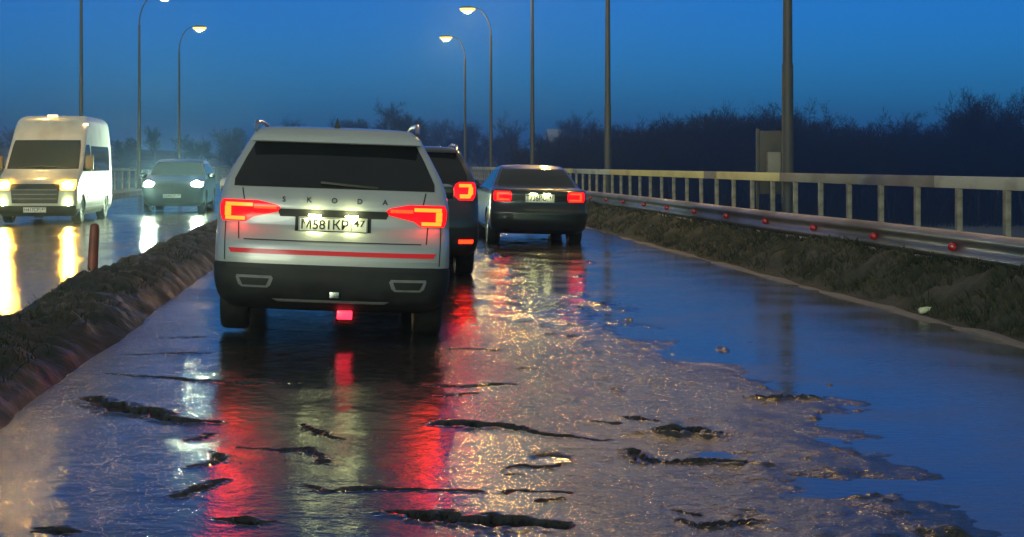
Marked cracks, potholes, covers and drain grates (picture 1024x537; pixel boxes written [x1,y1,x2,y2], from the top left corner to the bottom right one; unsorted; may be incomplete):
pothole [85,397,202,423]
crack [527,420,621,441]
pothole [388,511,574,530]
crack [434,368,540,397]
